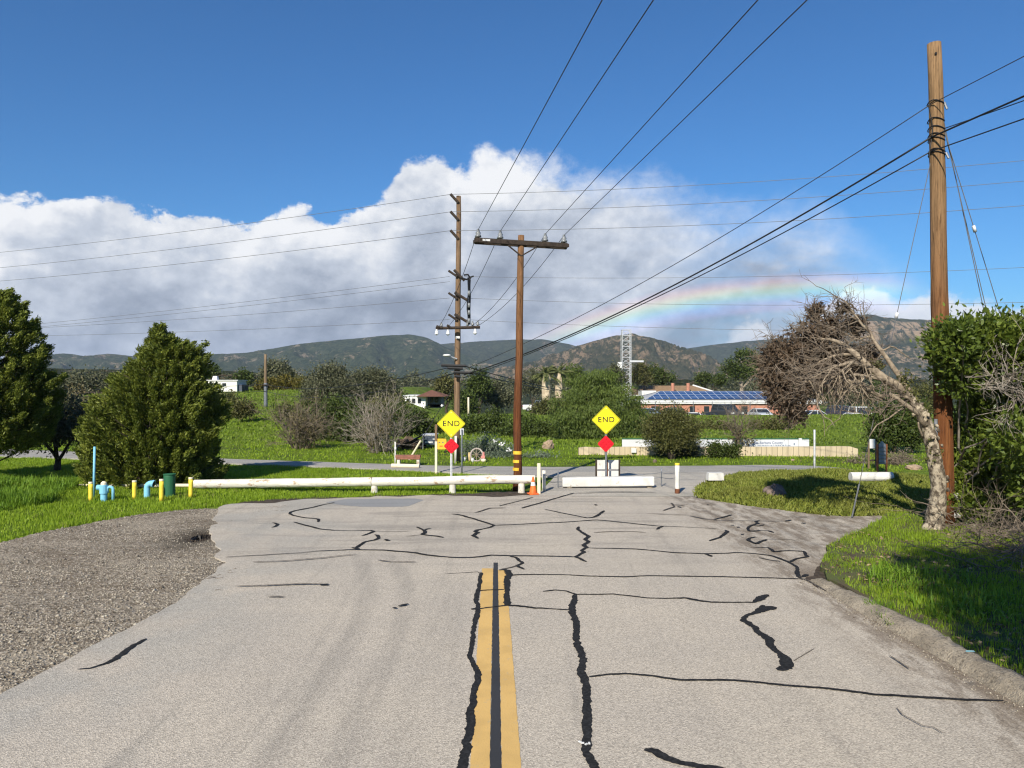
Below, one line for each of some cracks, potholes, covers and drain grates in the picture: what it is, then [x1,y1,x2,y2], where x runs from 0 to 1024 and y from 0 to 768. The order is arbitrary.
crack [80,638,147,669]
crack [229,491,1004,732]
pothole [188,534,211,542]
